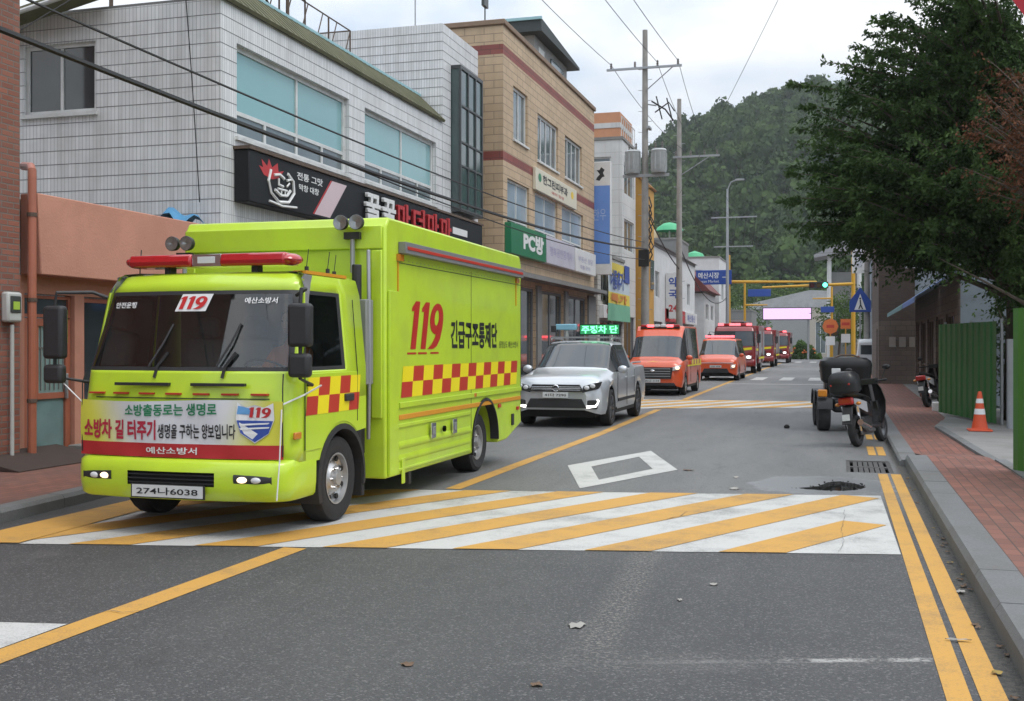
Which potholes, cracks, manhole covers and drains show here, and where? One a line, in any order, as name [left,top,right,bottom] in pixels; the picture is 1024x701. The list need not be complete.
drain grate [846,461,893,473]
pothole [800,480,865,491]
